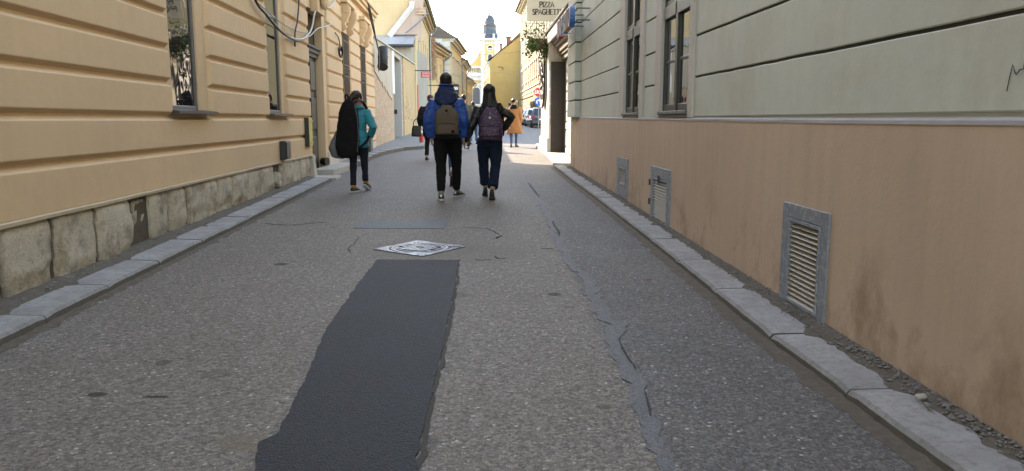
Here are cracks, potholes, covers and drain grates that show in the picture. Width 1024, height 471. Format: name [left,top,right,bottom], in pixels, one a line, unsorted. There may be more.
crack [474,170,675,471]
manhole cover [374,240,465,257]
